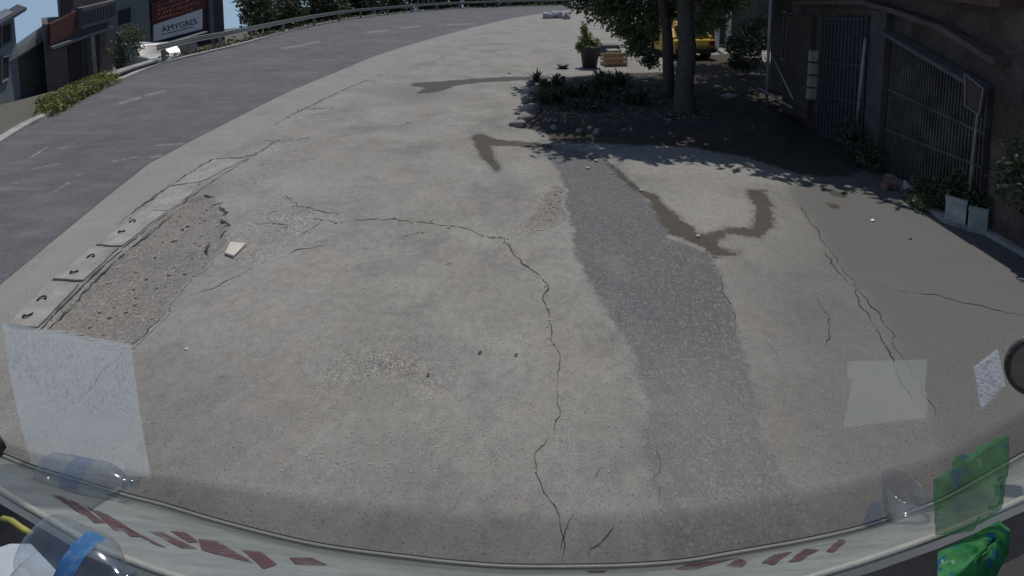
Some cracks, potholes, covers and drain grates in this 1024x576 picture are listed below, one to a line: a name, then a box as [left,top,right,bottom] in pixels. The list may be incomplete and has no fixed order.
crack [276,74,388,123]
crack [534,391,574,560]
crack [255,194,561,378]
